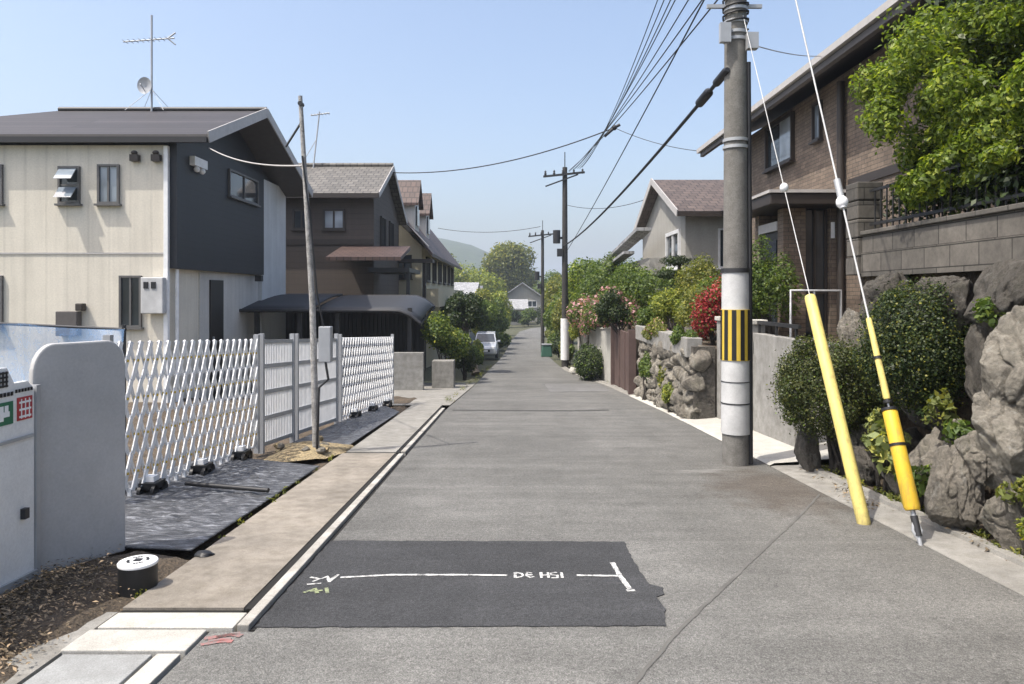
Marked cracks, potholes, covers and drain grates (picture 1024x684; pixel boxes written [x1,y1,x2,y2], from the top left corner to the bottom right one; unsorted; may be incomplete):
crack [631,495,820,684]
